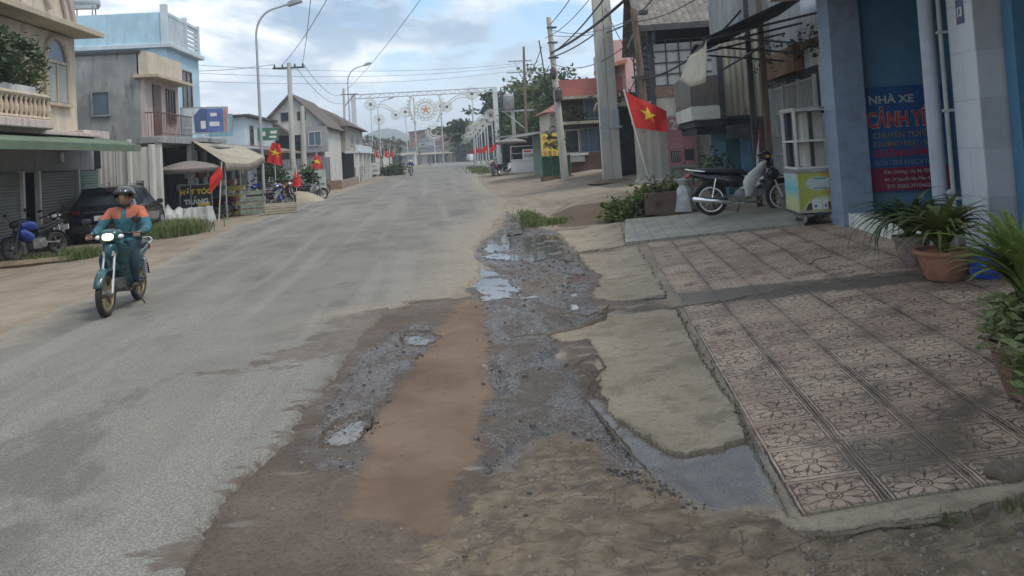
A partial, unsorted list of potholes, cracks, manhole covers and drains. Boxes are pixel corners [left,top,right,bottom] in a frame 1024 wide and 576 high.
pothole [399,329,442,347]
pothole [318,409,374,449]
